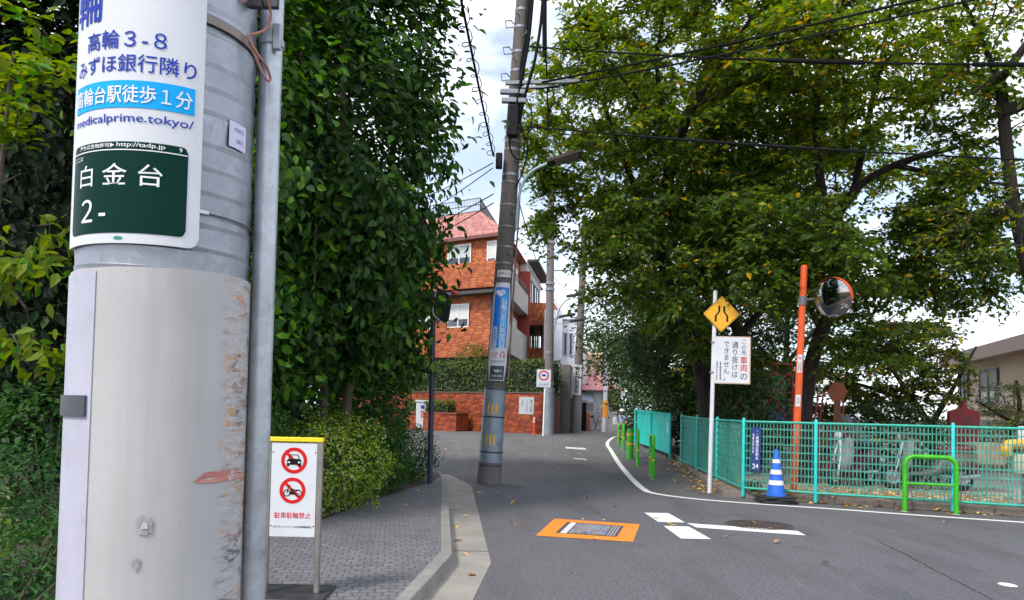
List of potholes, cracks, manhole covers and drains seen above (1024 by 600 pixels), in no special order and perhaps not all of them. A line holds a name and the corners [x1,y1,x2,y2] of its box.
crack [877,541,993,600]
manhole cover [725,520,794,530]
manhole cover [536,519,640,542]
